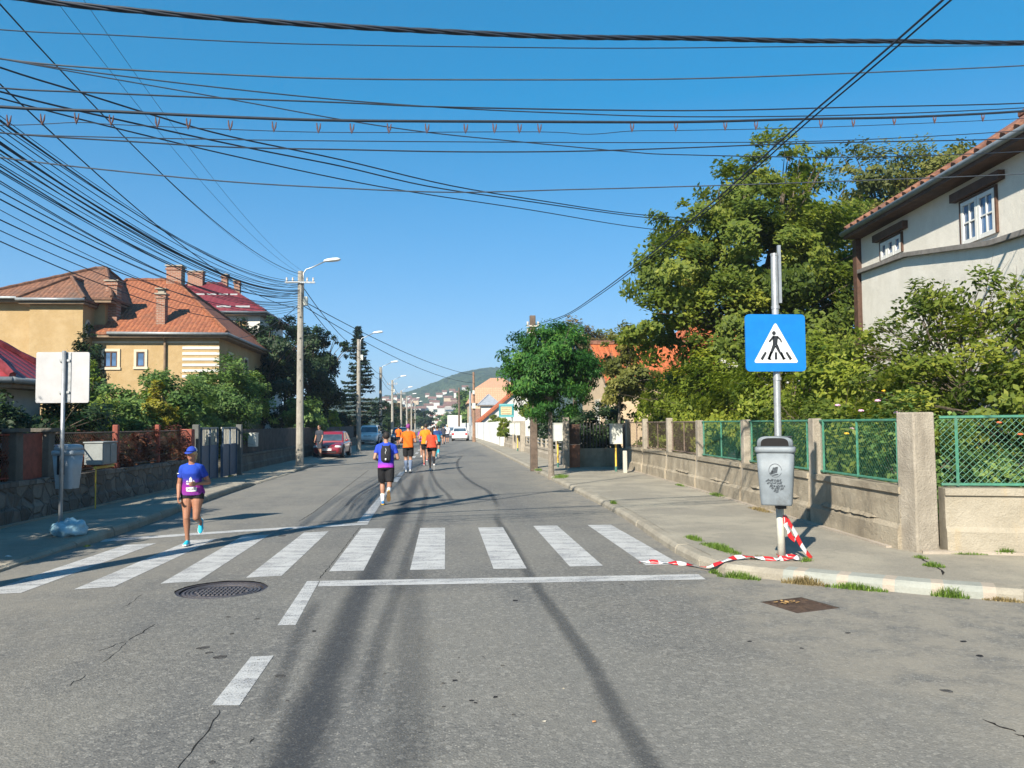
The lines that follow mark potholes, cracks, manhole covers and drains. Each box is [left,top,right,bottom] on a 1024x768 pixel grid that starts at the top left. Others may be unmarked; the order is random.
crack [178,710,220,768]
manhole cover [175,581,268,599]
